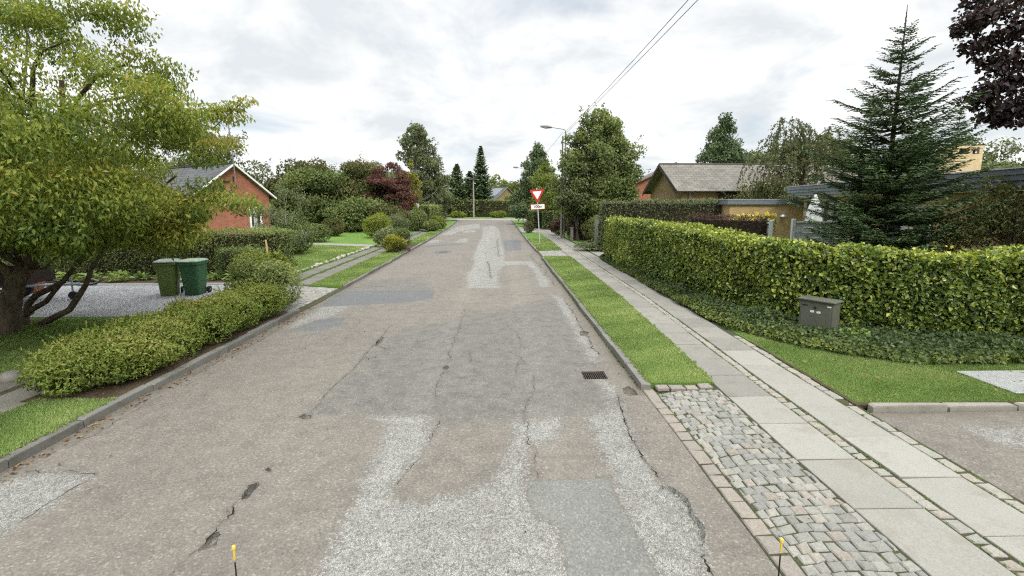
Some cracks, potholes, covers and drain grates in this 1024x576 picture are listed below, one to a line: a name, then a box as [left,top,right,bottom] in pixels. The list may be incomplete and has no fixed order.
crack [173,498,243,573]
drain grate [581,371,608,379]
pothole [242,483,260,500]
crack [22,399,156,520]
